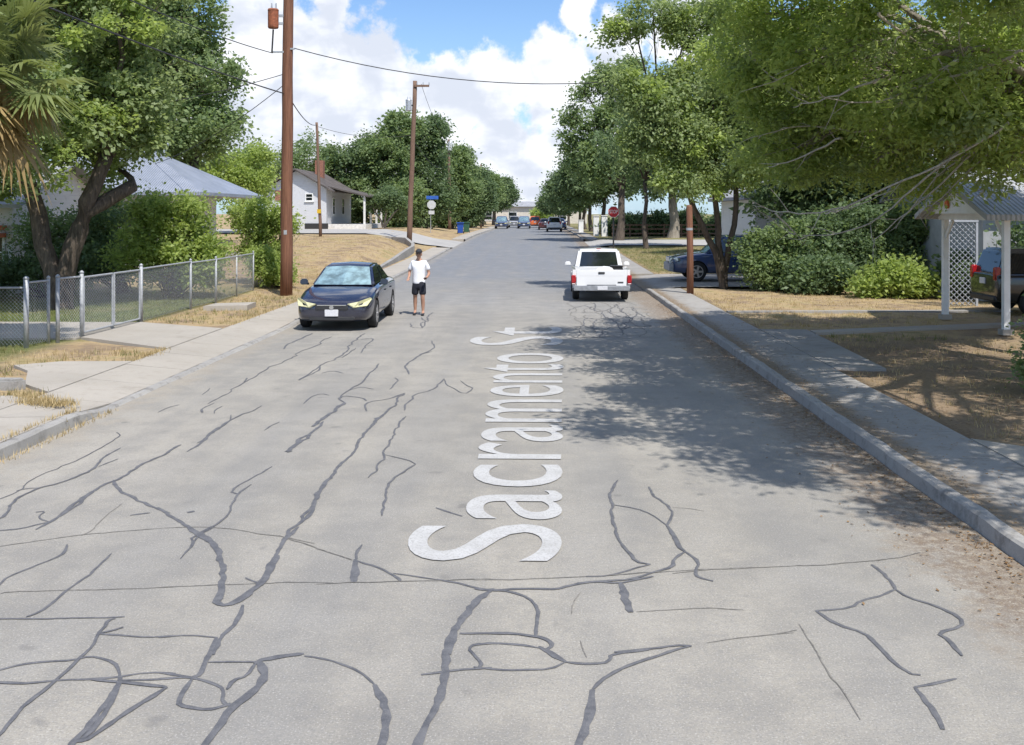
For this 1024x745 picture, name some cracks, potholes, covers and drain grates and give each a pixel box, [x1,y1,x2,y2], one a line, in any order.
crack [159,333,374,452]
crack [706,624,860,719]
crack [0,504,920,614]
crack [390,312,473,410]
crack [567,302,679,339]
